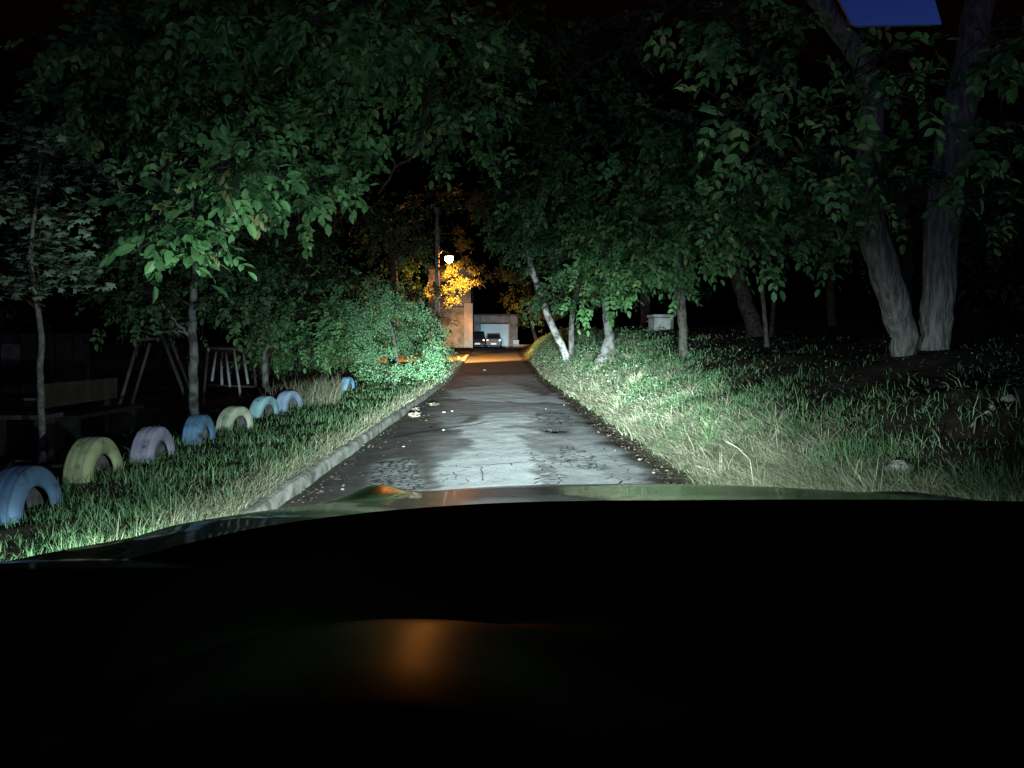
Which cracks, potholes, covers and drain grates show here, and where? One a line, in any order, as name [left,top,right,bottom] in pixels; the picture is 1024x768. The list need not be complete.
crack [369,459,428,490]
crack [440,445,650,485]
